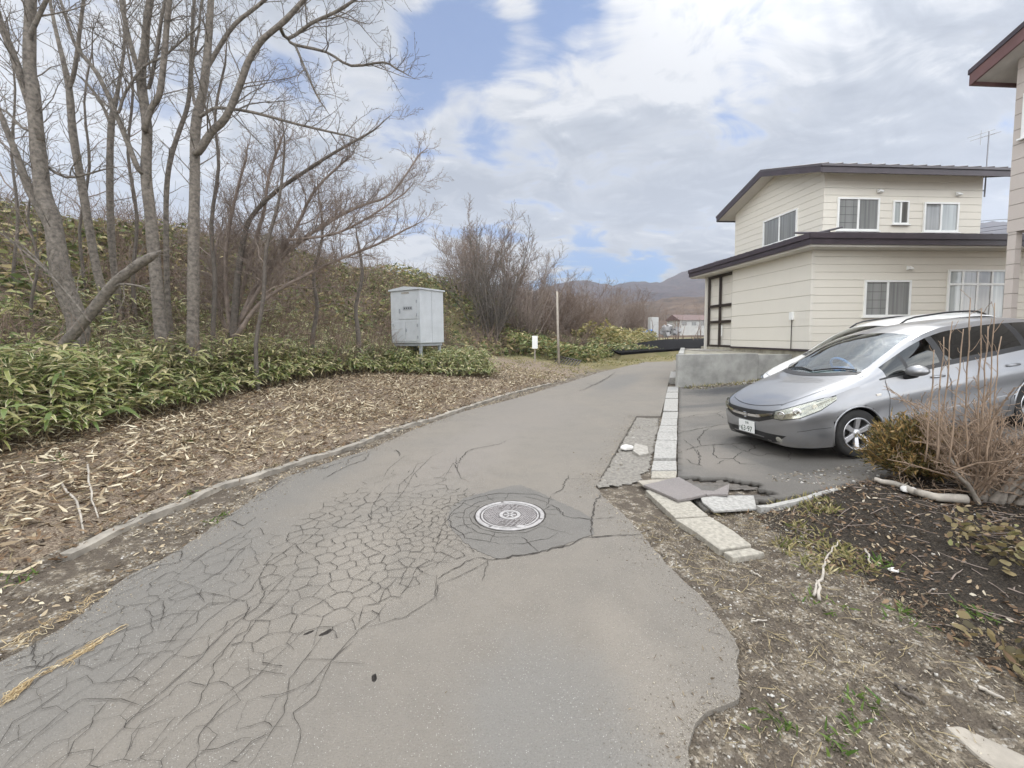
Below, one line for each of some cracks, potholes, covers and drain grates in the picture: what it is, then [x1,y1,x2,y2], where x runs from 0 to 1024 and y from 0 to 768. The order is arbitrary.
crack [679,410,813,467]
crack [0,454,636,768]
manhole cover [476,501,544,531]
